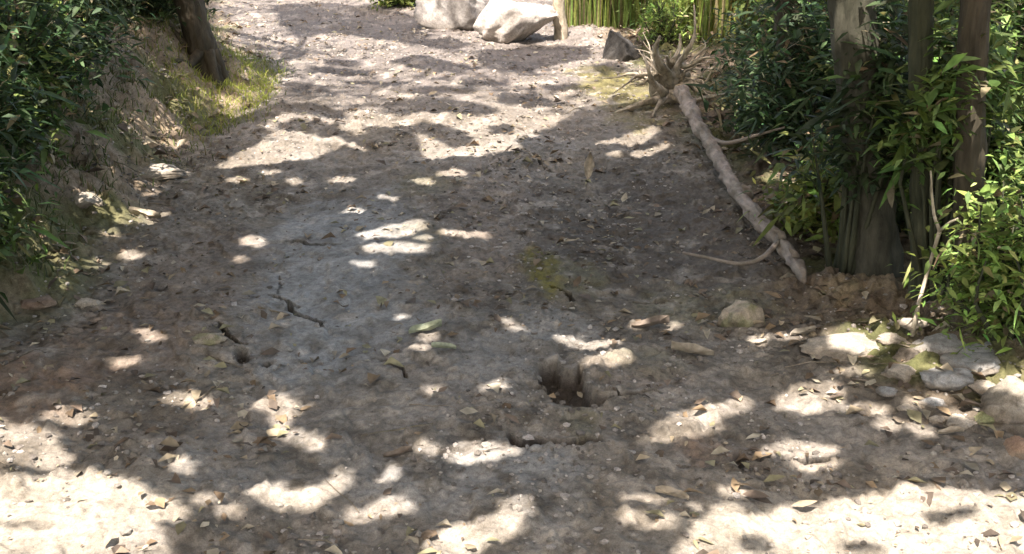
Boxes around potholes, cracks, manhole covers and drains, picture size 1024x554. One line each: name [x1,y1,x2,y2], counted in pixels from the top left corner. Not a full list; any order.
crack [215,321,256,345]
pothole [231,345,251,367]
crack [268,276,325,327]
pothole [532,355,614,407]
